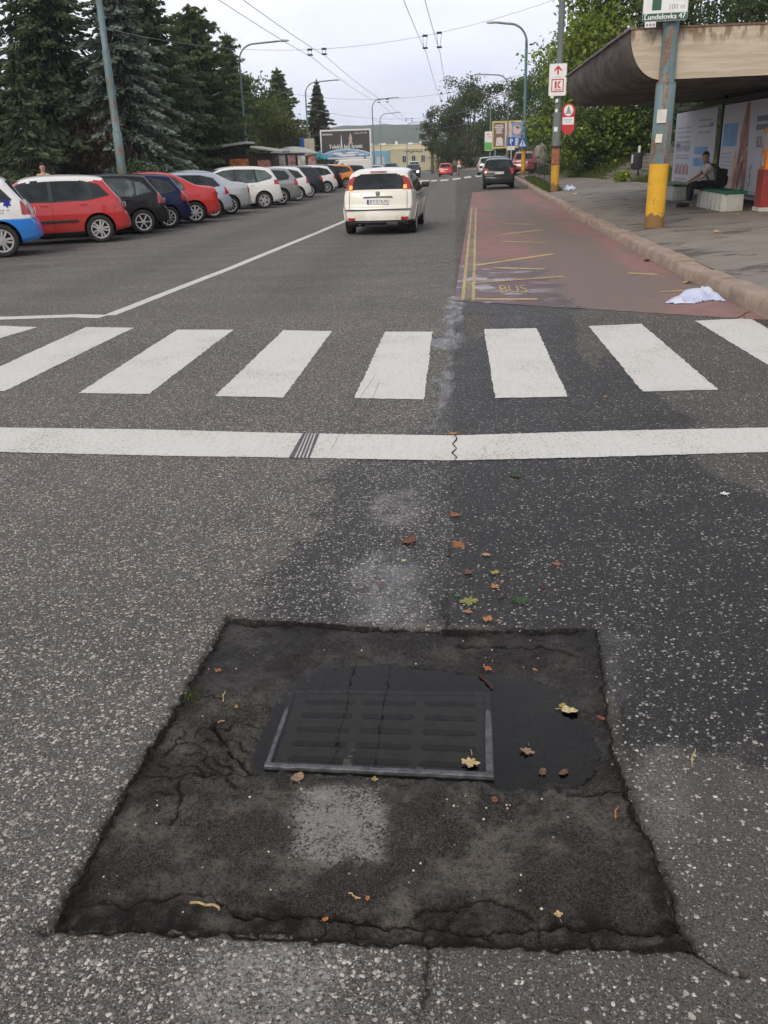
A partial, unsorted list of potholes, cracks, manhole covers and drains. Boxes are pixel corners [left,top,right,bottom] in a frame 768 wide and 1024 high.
drain grate [264,690,494,787]
crack [37,624,739,977]
